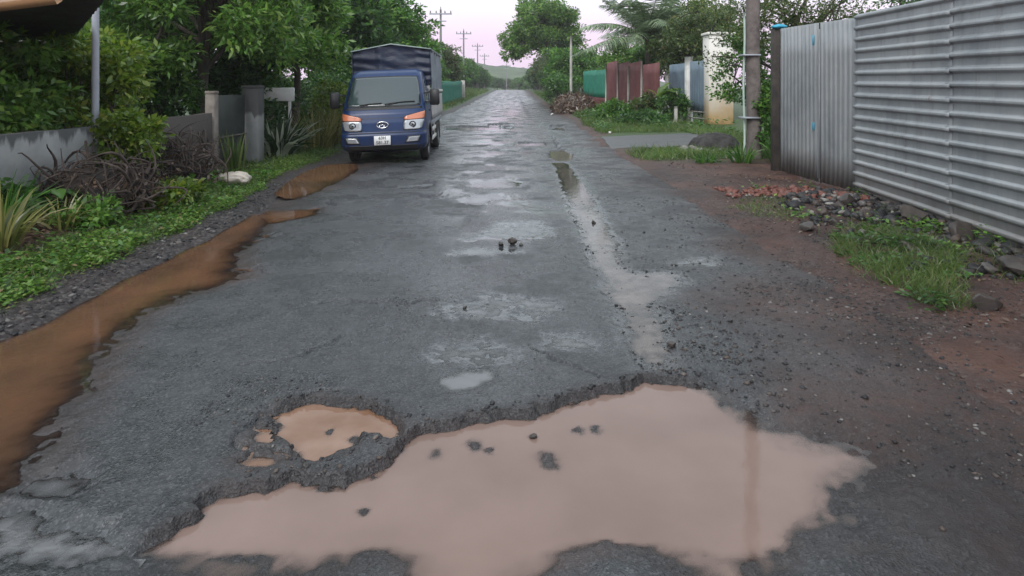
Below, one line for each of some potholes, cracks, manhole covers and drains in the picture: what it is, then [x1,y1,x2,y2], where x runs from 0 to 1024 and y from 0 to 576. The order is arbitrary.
pothole [428,366,502,395]
pothole [547,149,575,161]
pothole [135,373,897,576]
